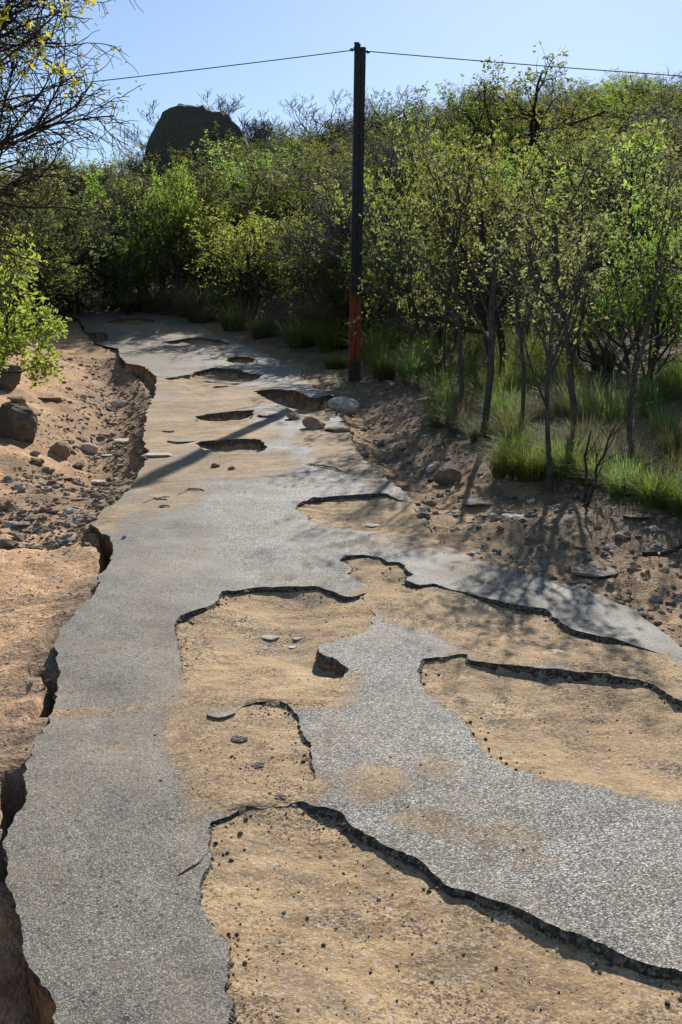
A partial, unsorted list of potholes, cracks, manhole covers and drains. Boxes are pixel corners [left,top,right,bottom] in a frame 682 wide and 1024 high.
pothole [417,654,682,795]
pothole [227,356,254,364]
pothole [295,493,440,545]
pothole [174,586,376,713]
crack [174,853,208,876]
pothole [254,389,349,421]
